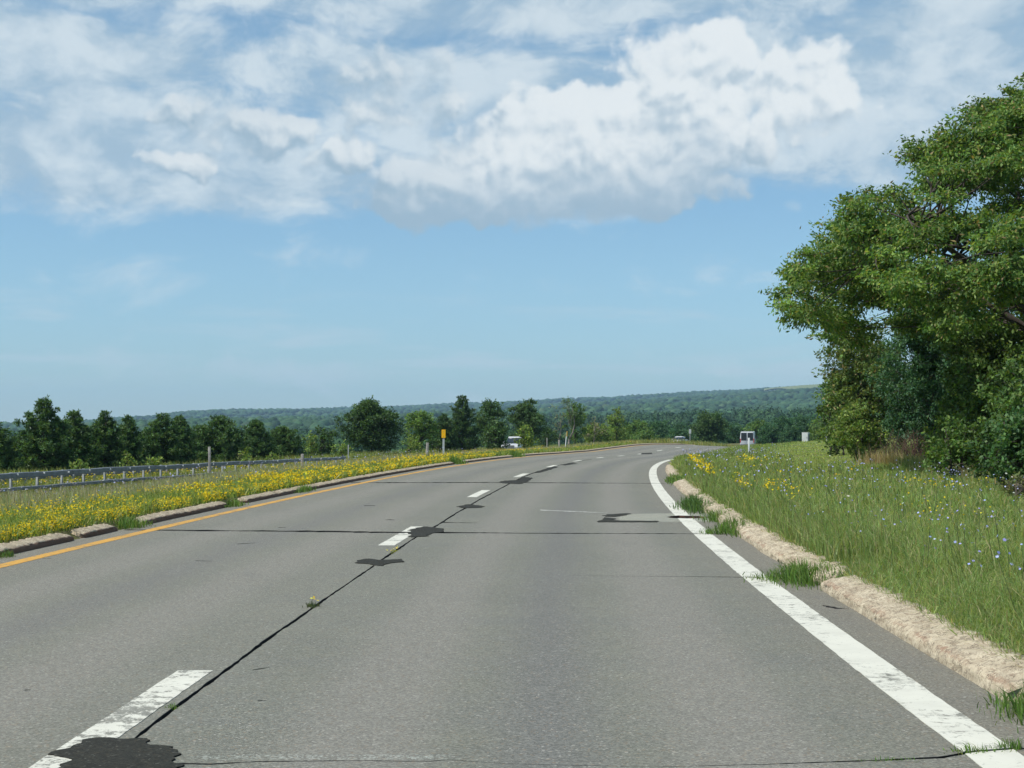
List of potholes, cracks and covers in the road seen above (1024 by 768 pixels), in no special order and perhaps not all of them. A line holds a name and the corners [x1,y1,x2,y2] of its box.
crack [135,459,731,738]
